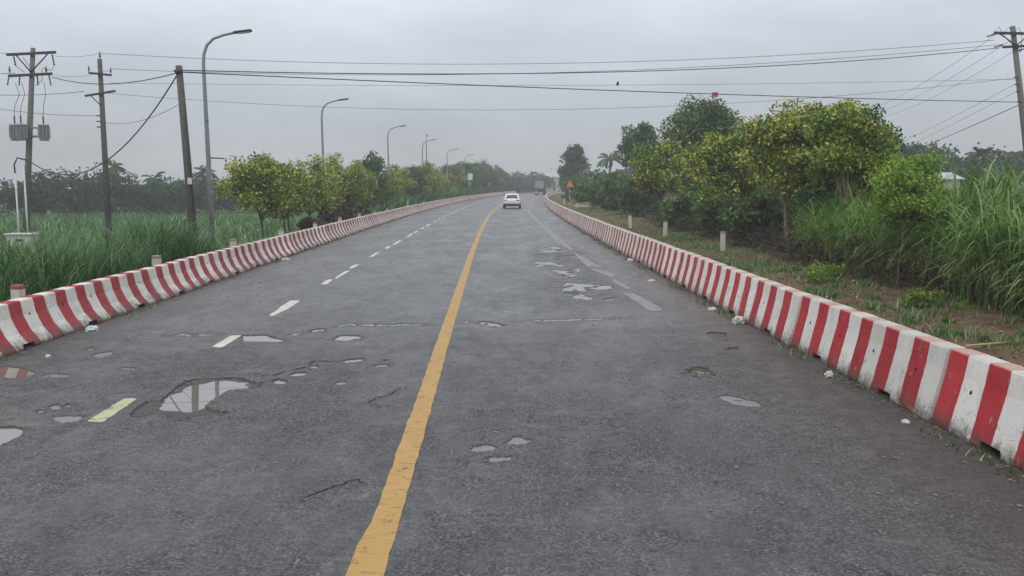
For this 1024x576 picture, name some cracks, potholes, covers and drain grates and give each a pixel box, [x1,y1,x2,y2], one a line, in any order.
pothole [717,395,762,407]
pothole [0,426,24,445]
pothole [129,377,267,422]
pothole [505,436,532,445]
pothole [470,444,498,452]
crack [299,480,364,500]
pothole [706,332,728,341]
pothole [688,366,716,378]
pothole [53,414,91,423]
pothole [242,334,285,342]
